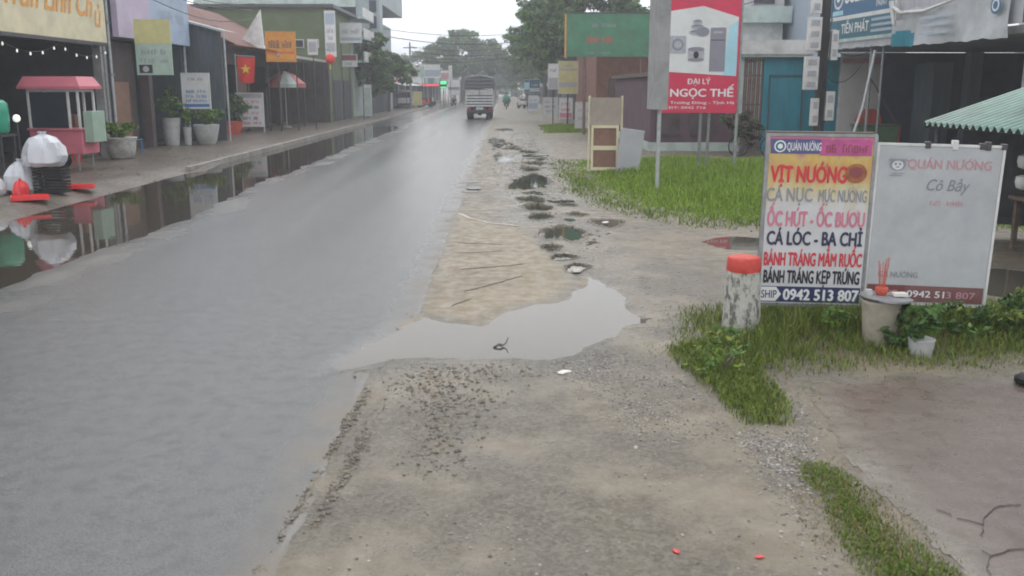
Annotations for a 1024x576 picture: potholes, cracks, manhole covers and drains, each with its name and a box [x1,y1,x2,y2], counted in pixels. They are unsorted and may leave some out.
crack [937,504,1024,574]
pothole [549,253,581,261]
pothole [519,202,556,212]
pothole [504,171,558,192]
pothole [487,137,510,150]
pothole [514,195,548,203]
pothole [586,218,628,229]
pothole [526,211,557,221]
pothole [564,262,593,273]
pothole [533,224,589,243]
